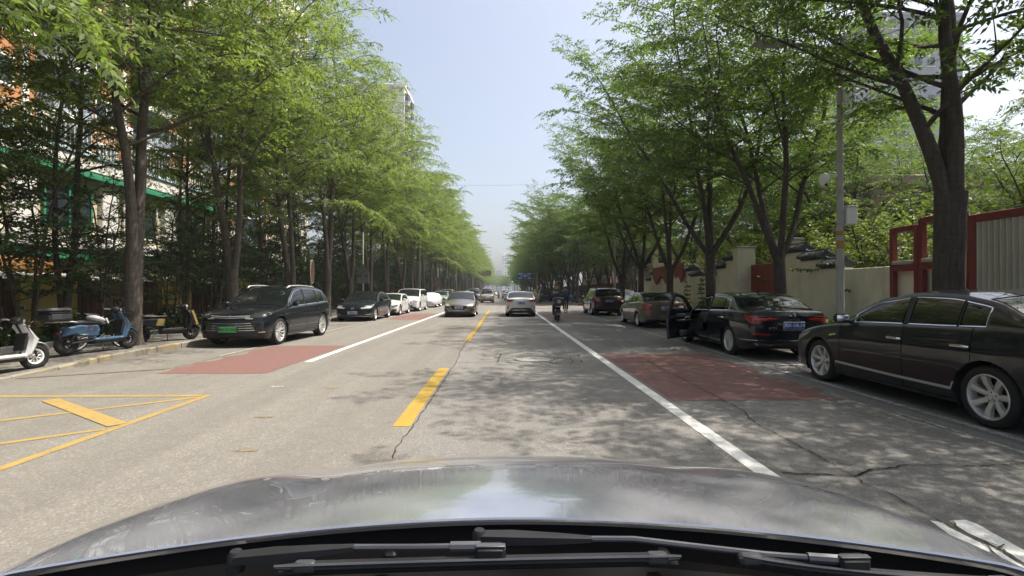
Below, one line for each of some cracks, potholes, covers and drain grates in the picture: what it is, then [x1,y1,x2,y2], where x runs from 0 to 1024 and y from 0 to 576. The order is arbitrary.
crack [577,323,1024,565]
crack [392,319,485,457]
